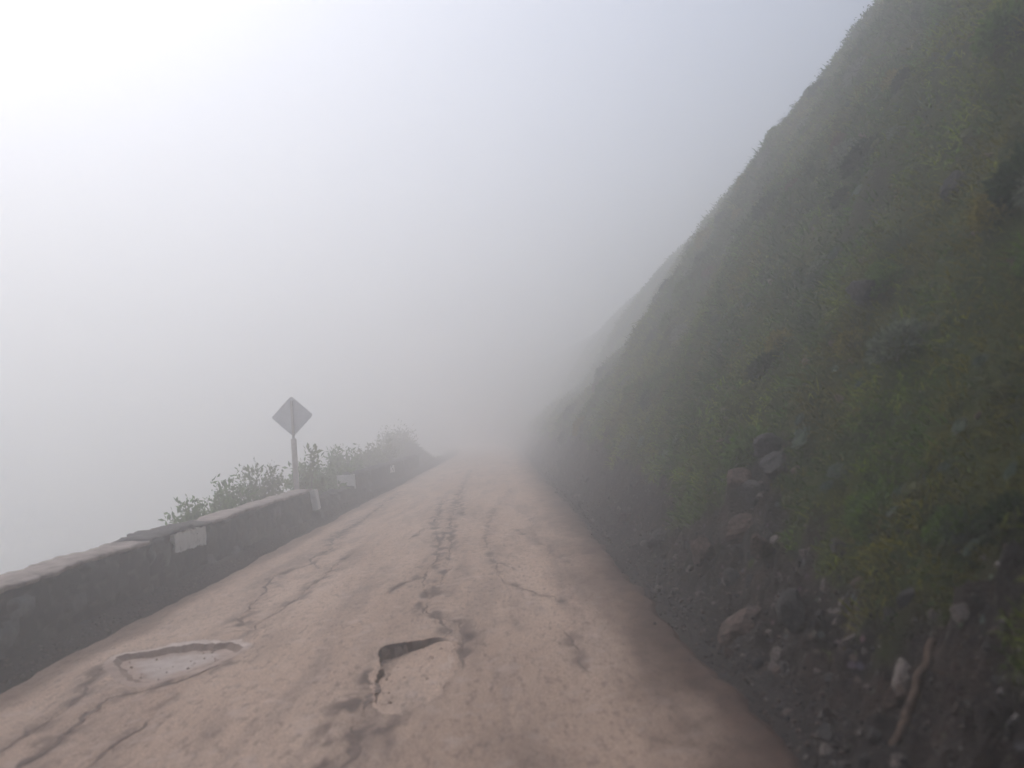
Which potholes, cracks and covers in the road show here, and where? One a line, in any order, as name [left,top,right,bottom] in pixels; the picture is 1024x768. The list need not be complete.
crack [472,508,578,606]
crack [228,492,398,634]
crack [392,469,473,669]
crack [1,664,220,768]
pothole [368,636,460,715]
crack [564,632,591,673]
pothole [102,639,253,688]
